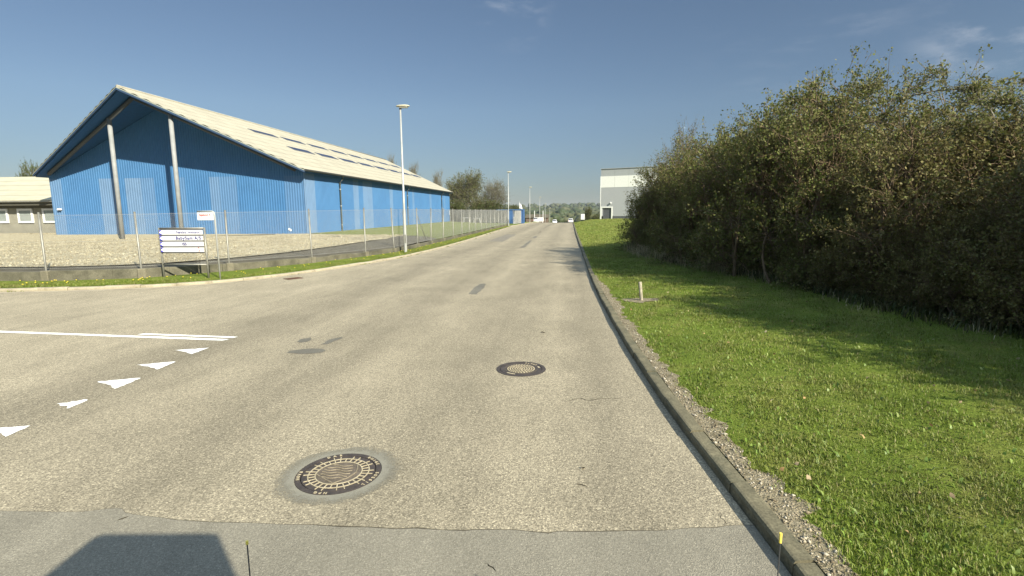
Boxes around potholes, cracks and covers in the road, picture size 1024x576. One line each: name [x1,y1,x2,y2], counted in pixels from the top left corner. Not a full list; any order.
manhole cover [496,362,546,377]
manhole cover [279,447,397,504]
